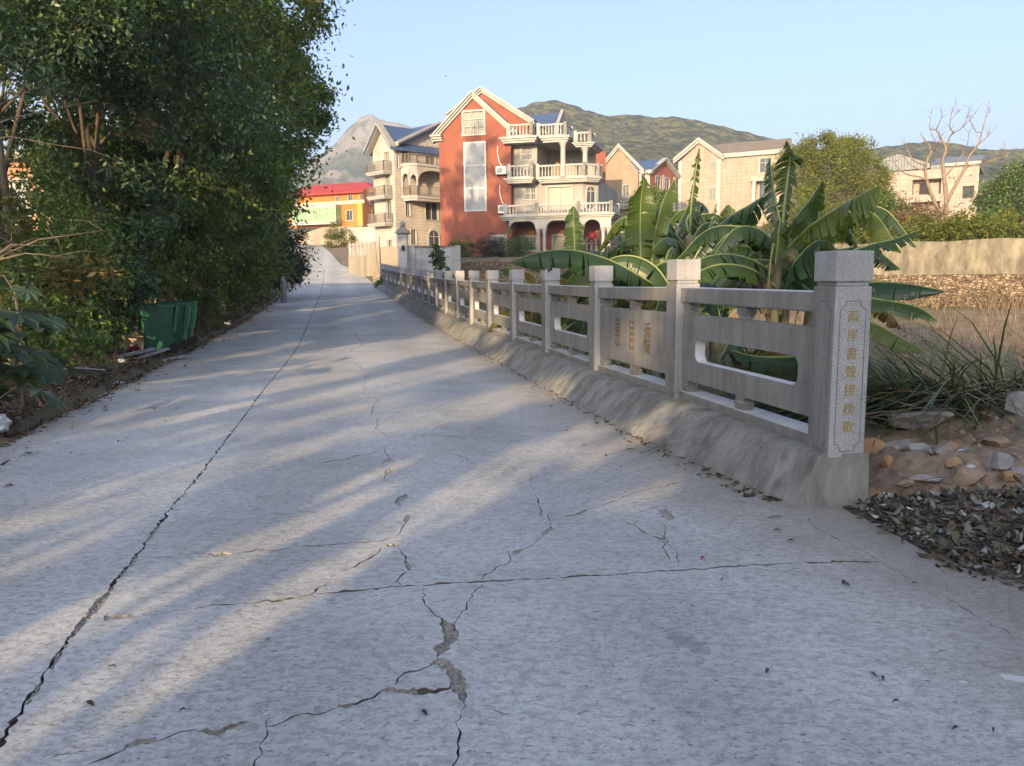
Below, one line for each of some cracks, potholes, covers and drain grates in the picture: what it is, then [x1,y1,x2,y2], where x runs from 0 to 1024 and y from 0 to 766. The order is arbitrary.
crack [0,271,1022,766]
